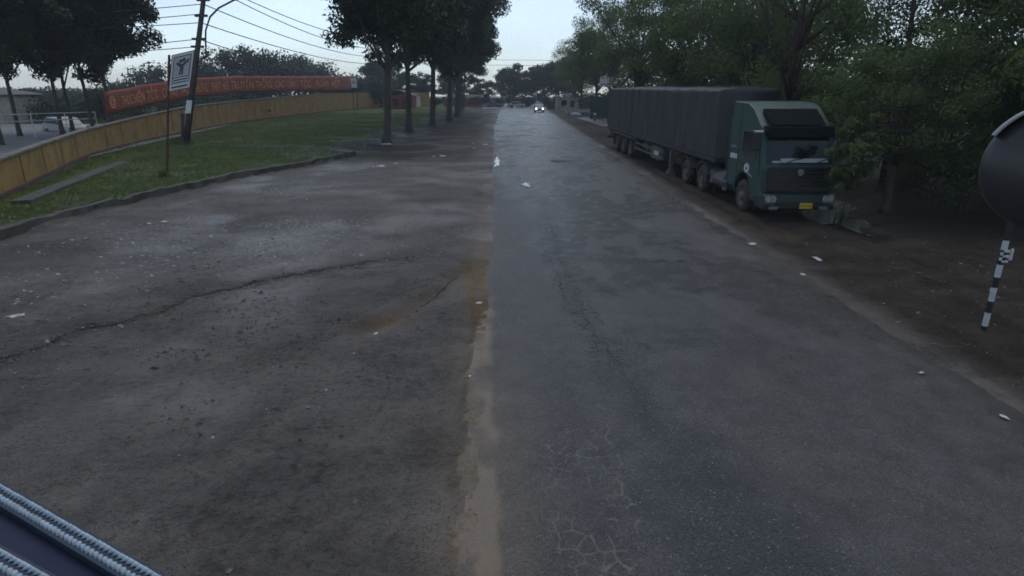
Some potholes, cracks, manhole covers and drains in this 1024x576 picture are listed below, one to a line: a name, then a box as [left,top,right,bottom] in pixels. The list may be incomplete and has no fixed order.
crack [484,106,776,576]
crack [0,256,462,364]
